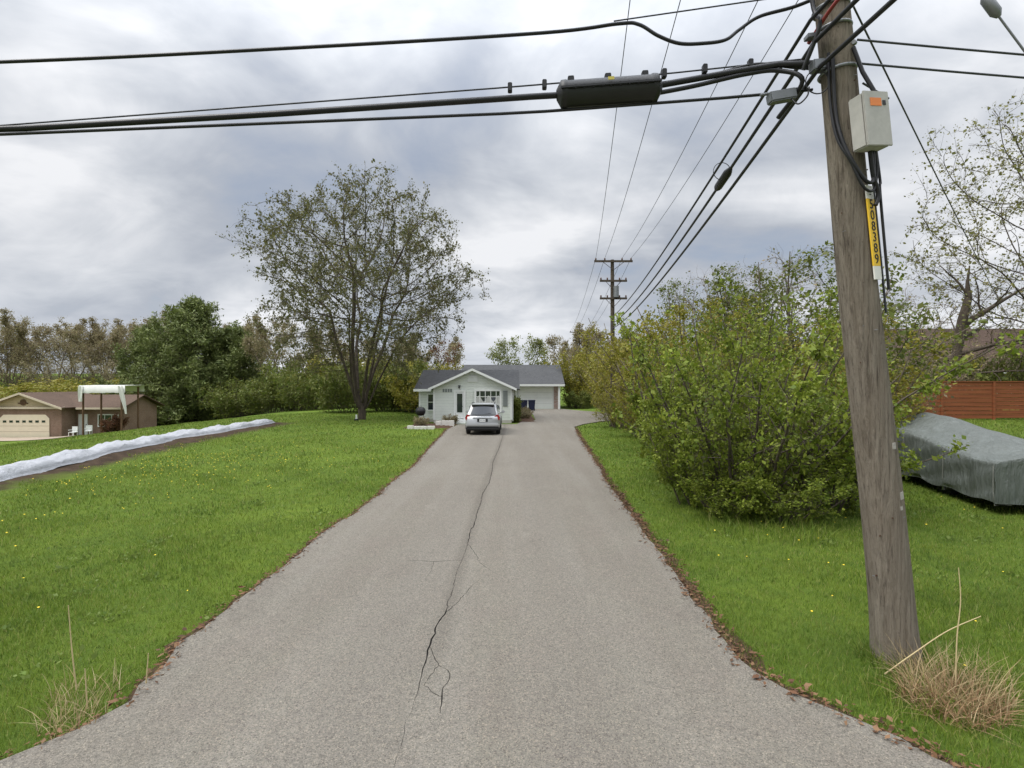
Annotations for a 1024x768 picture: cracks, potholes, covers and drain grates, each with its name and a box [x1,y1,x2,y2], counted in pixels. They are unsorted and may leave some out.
crack [394,436,503,767]
